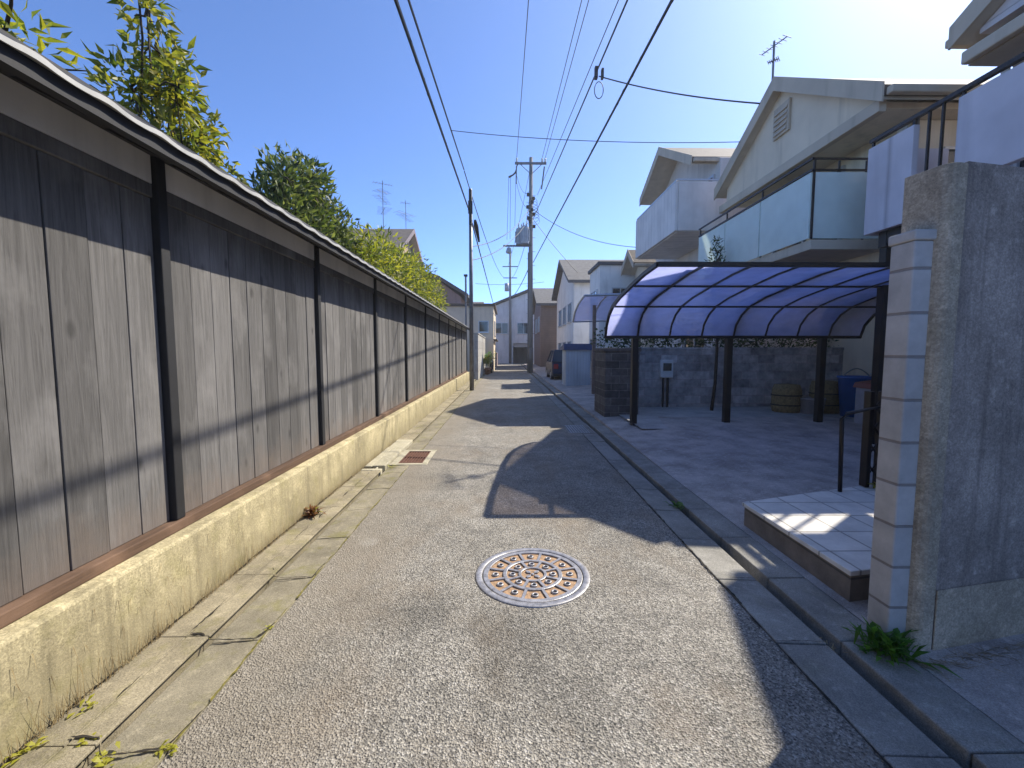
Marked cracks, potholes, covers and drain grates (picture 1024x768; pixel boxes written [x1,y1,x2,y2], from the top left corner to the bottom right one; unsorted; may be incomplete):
drain grate [562,425,593,434]
manhole cover [475,548,591,608]
drain grate [390,450,437,466]
